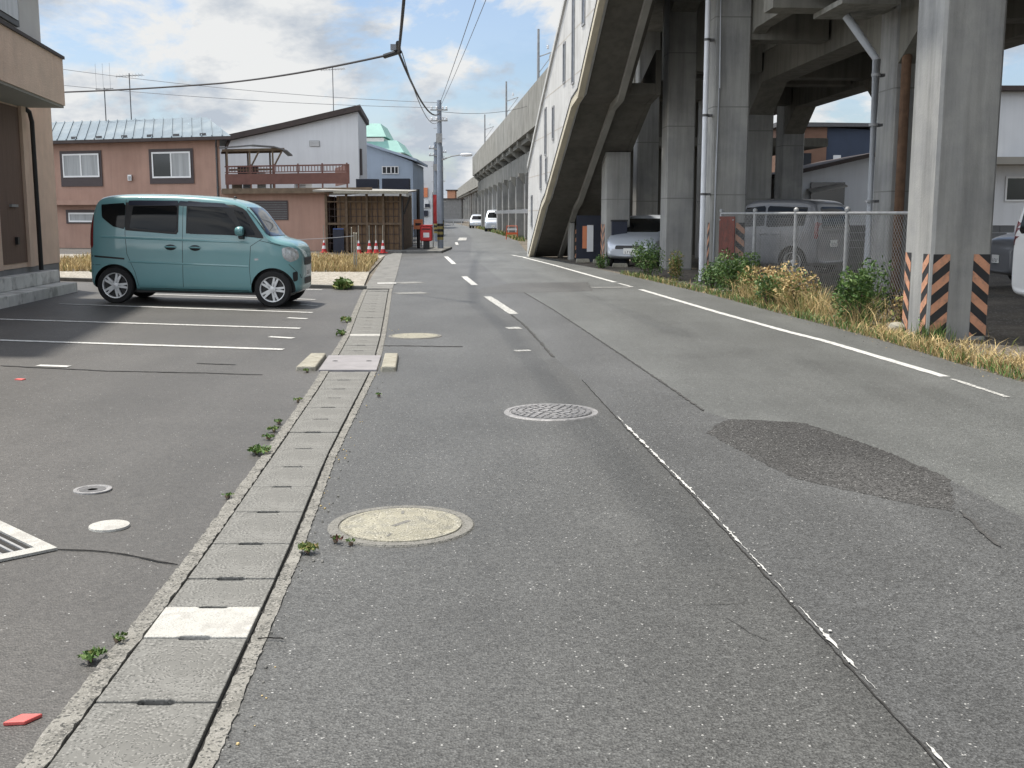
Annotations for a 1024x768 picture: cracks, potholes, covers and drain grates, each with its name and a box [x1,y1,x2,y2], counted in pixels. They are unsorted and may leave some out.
manhole cover [504,403,599,421]
crack [959,511,1001,547]
crack [57,549,178,565]
drain grate [0,521,57,562]
manhole cover [327,505,475,547]
utility cover [73,484,113,495]
utility cover [88,520,130,533]
